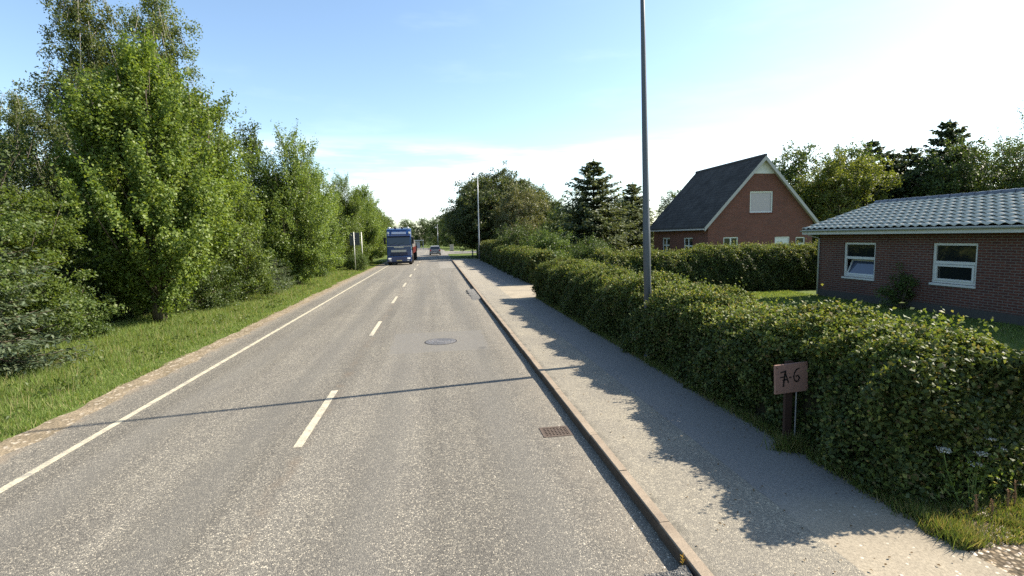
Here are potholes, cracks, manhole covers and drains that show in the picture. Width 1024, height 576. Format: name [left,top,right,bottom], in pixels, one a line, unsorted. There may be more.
drain grate [539,426,573,438]
